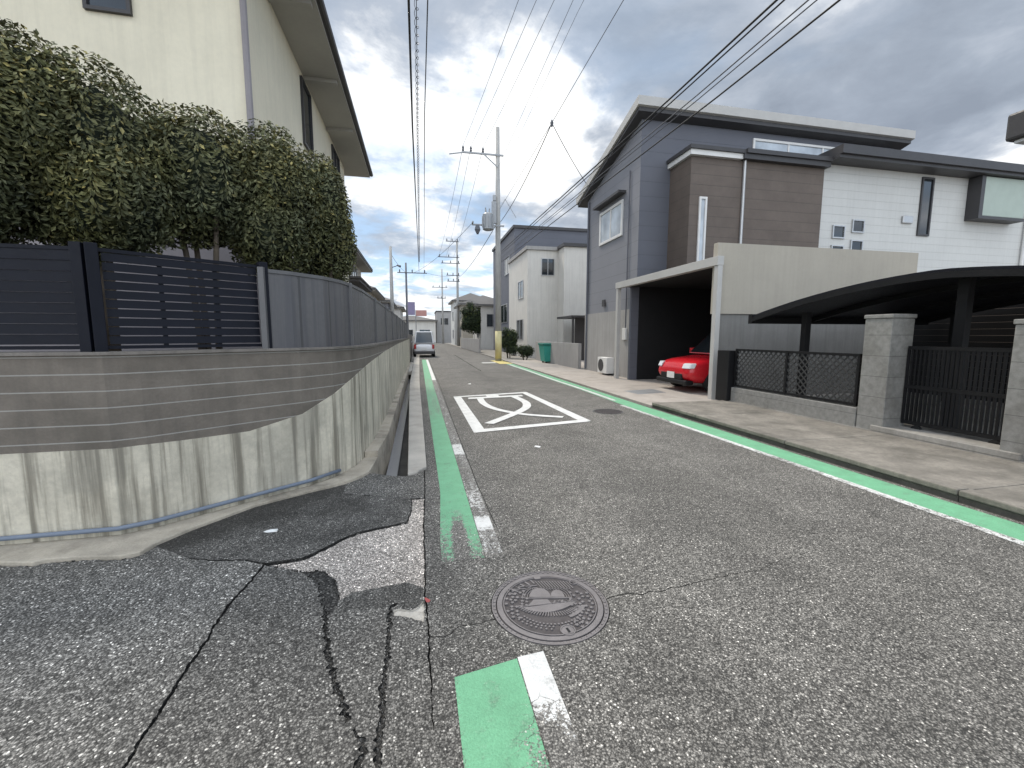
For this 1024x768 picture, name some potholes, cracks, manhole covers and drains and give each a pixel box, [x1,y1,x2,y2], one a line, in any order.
crack [606,552,807,601]
manhole cover [492,571,609,646]
crack [27,494,420,768]
